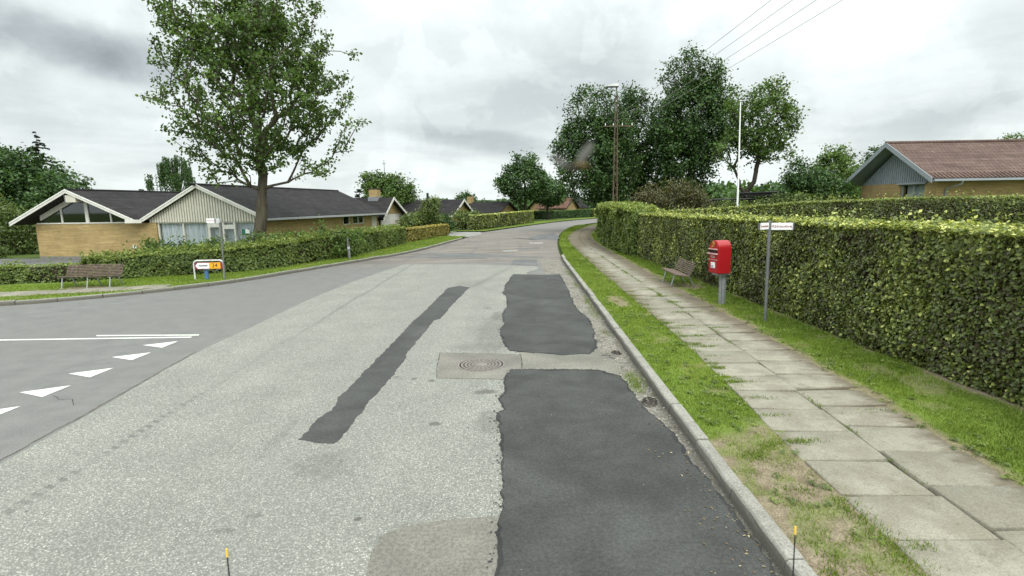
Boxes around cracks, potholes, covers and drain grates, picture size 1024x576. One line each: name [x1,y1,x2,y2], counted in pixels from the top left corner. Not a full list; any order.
pothole [640,395,659,409]
manhole cover [457,357,505,372]
